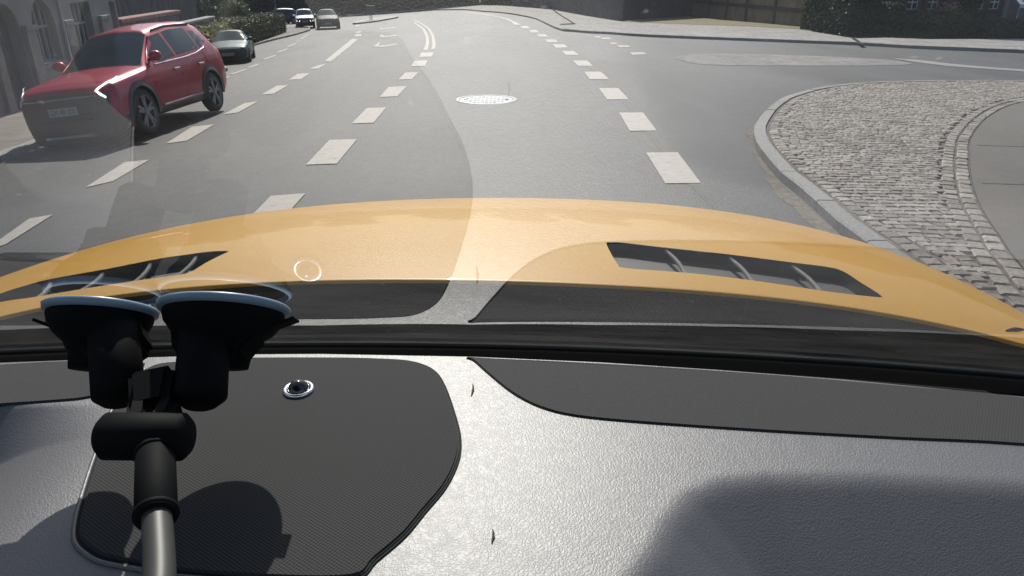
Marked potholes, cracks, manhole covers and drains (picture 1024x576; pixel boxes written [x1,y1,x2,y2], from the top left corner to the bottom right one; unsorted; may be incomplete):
manhole cover [456,95,517,104]
